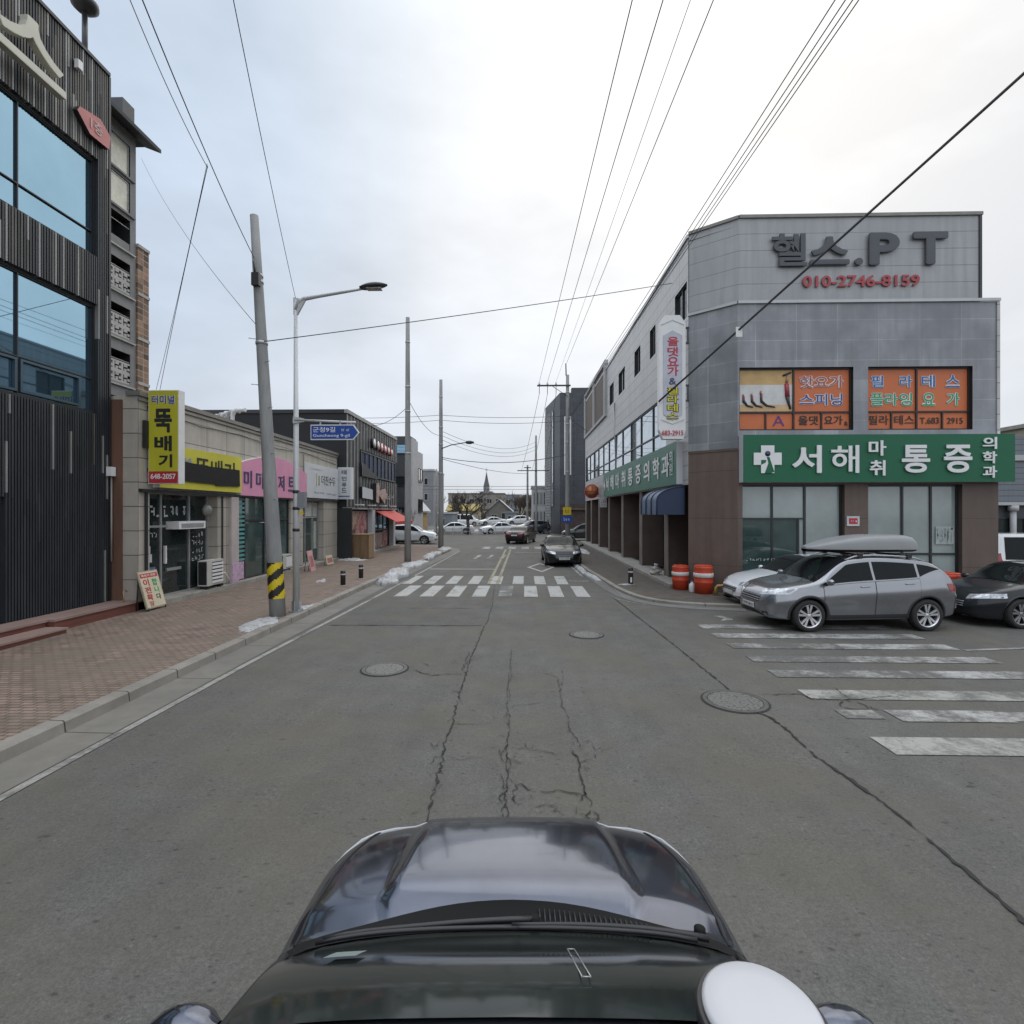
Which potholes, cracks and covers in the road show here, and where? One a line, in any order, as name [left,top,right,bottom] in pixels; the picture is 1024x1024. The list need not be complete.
crack [613,597,1024,923]
crack [412,626,489,823]
crack [488,649,603,821]
manhole cover [700,690,771,714]
manhole cover [569,630,604,639]
manhole cover [360,662,409,677]
